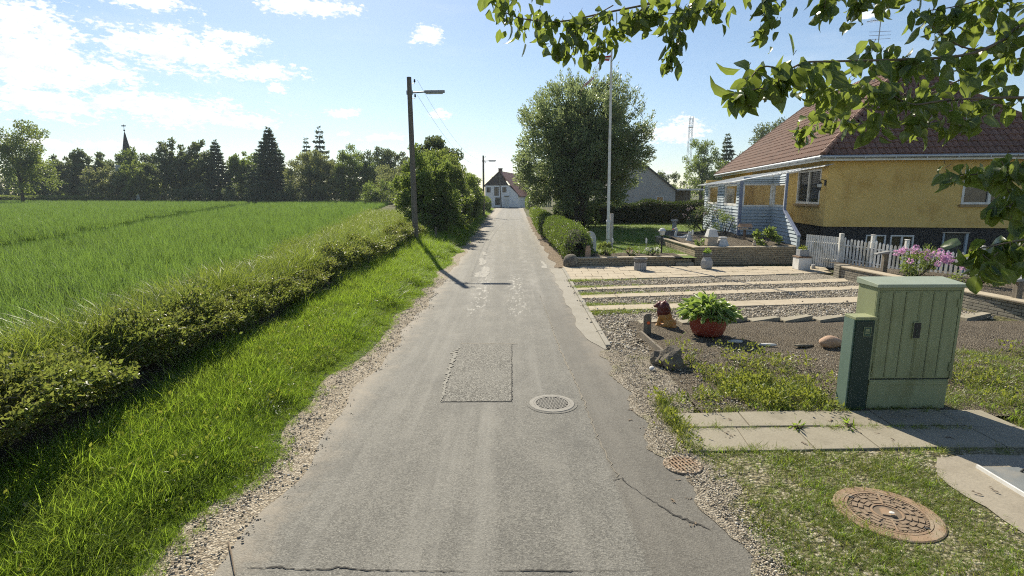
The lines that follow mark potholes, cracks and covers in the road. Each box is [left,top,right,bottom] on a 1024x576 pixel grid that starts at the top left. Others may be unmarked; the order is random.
manhole cover [833,487,948,544]
manhole cover [526,394,578,414]
drain grate [663,455,703,475]
crack [540,295,709,529]
